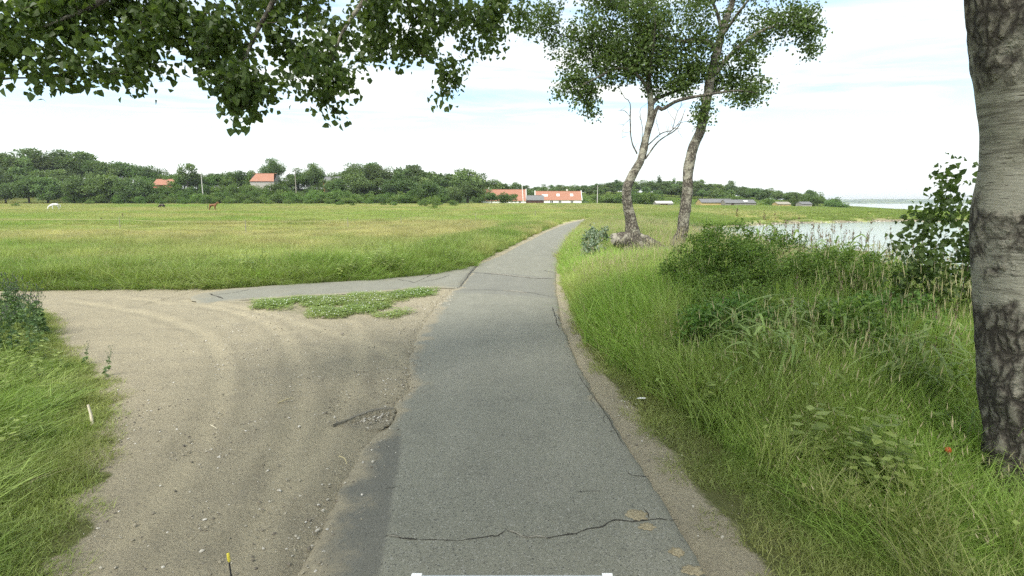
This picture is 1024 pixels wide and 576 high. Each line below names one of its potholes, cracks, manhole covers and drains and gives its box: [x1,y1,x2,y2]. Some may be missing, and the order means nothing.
pothole [333,407,396,432]
crack [577,372,624,445]
crack [386,509,675,540]
